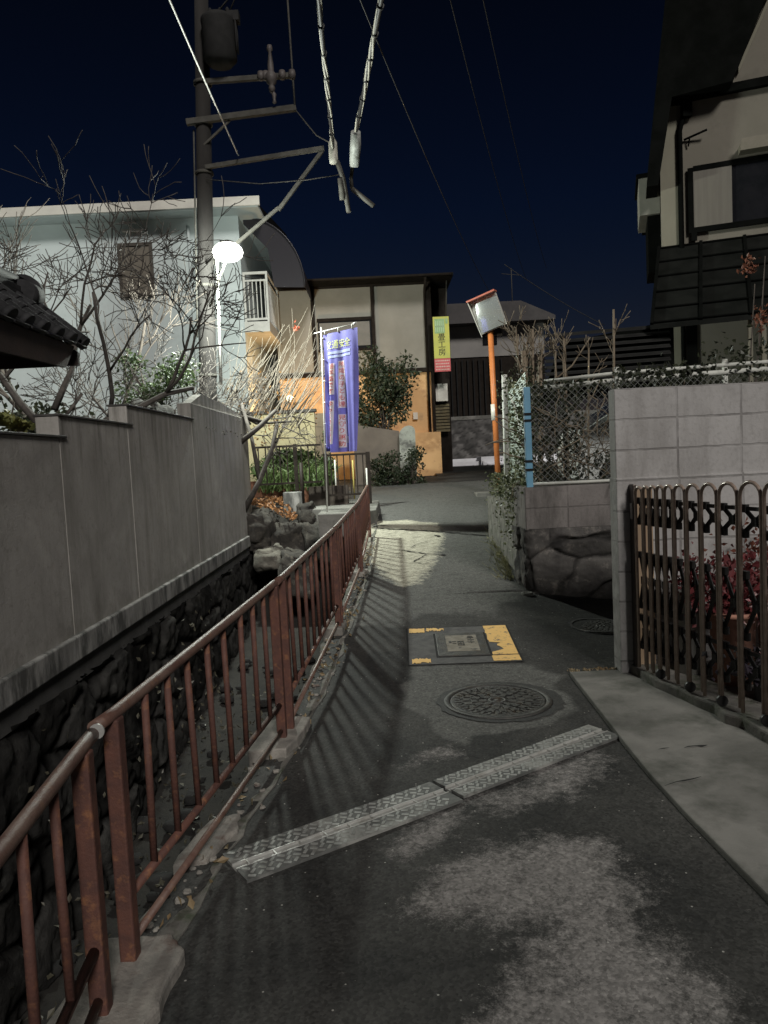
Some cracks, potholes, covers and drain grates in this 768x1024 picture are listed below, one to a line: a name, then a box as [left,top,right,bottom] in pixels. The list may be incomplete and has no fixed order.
manhole cover [436,682,565,722]
manhole cover [568,618,614,635]
utility cover [407,625,524,665]
crack [371,525,489,571]
